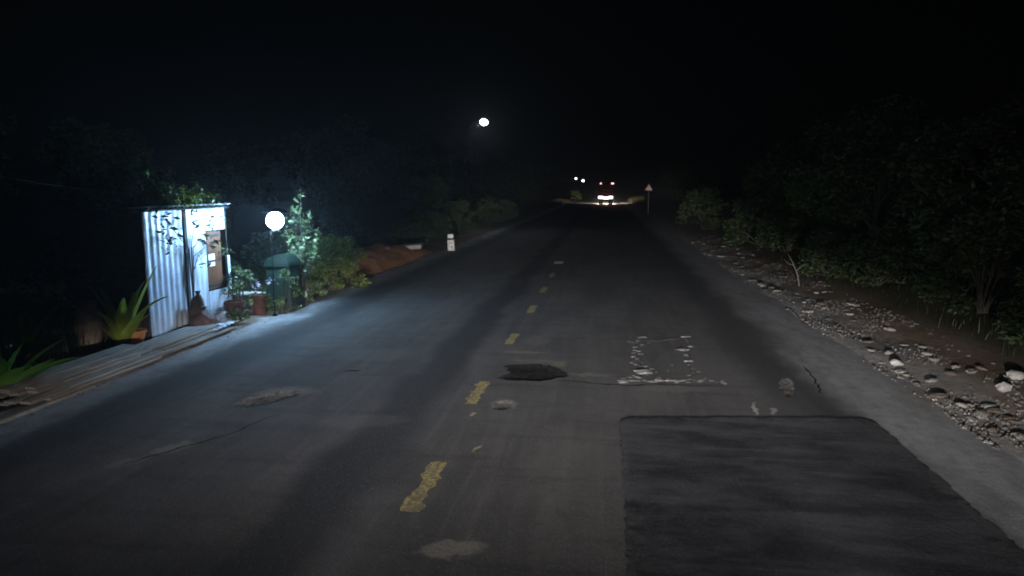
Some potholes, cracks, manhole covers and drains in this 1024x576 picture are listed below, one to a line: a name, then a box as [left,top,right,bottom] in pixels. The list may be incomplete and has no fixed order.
pothole [779,379,794,397]
pothole [492,401,513,410]
crack [120,414,278,466]
pothole [497,364,569,381]
